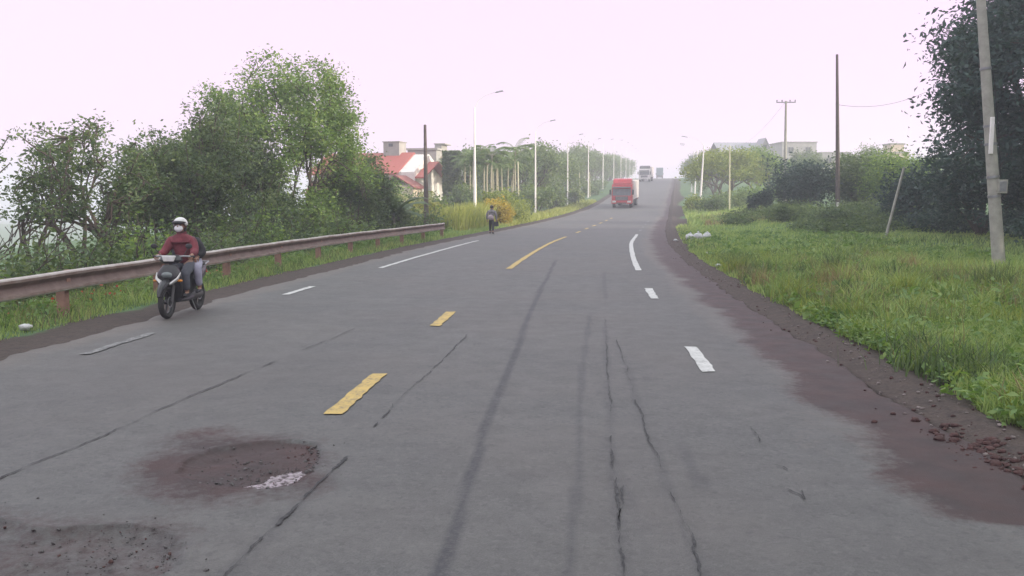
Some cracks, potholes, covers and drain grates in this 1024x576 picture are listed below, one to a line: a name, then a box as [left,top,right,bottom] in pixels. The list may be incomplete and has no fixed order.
pothole [0,497,209,576]
crack [223,334,467,576]
crack [604,323,702,576]
pothole [164,437,345,493]
crack [0,329,352,478]
